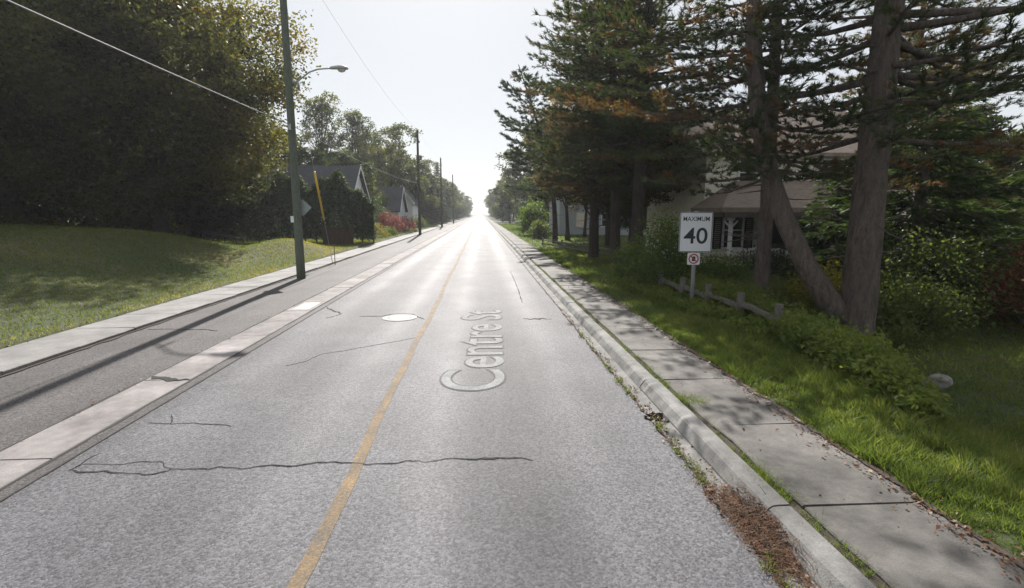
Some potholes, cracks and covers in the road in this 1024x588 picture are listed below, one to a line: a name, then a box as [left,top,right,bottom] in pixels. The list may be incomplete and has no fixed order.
crack [70,454,530,475]
